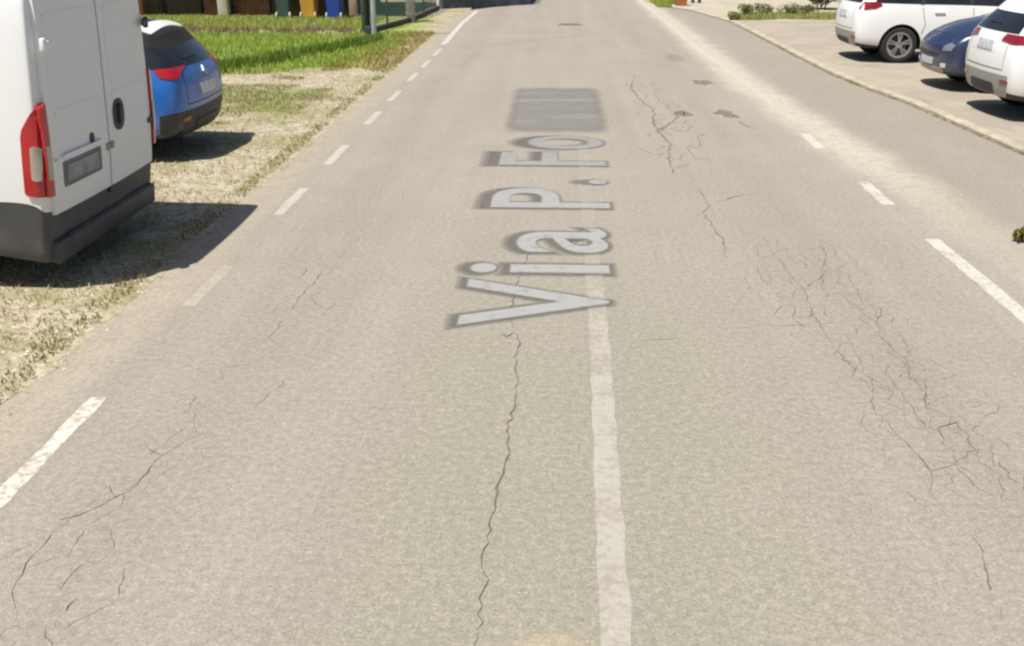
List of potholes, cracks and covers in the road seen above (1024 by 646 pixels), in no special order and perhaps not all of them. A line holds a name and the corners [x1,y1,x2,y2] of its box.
crack [698,189,749,258]
crack [625,76,709,173]
crack [0,265,347,646]
crack [740,233,1024,590]
crack [474,252,530,645]
